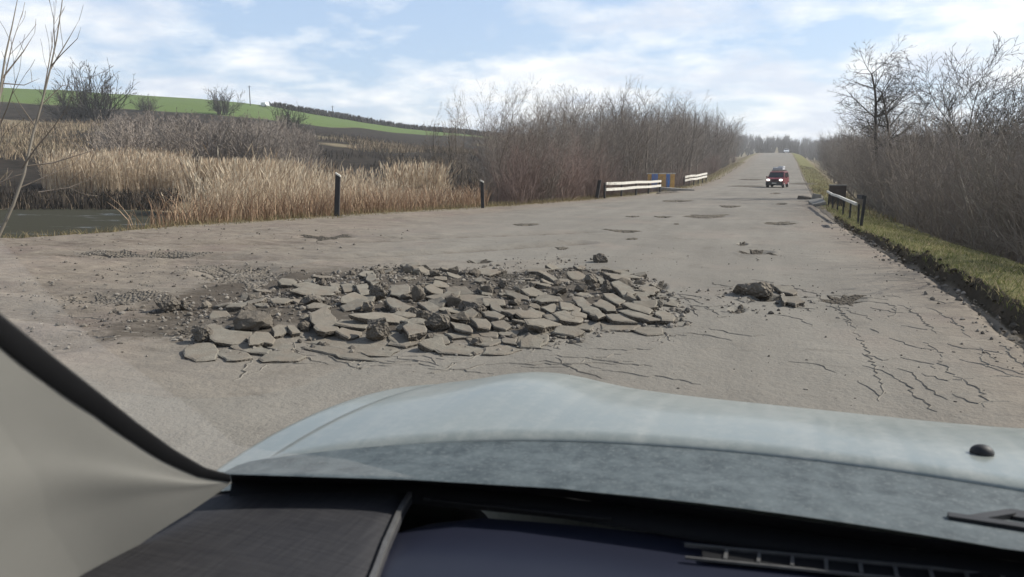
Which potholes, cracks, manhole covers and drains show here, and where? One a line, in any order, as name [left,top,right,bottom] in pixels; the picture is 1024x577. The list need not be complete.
crack [751,279,1024,412]
pothole [817,294,867,306]
pothole [192,265,296,291]
pothole [489,273,566,290]
crack [234,282,765,385]
